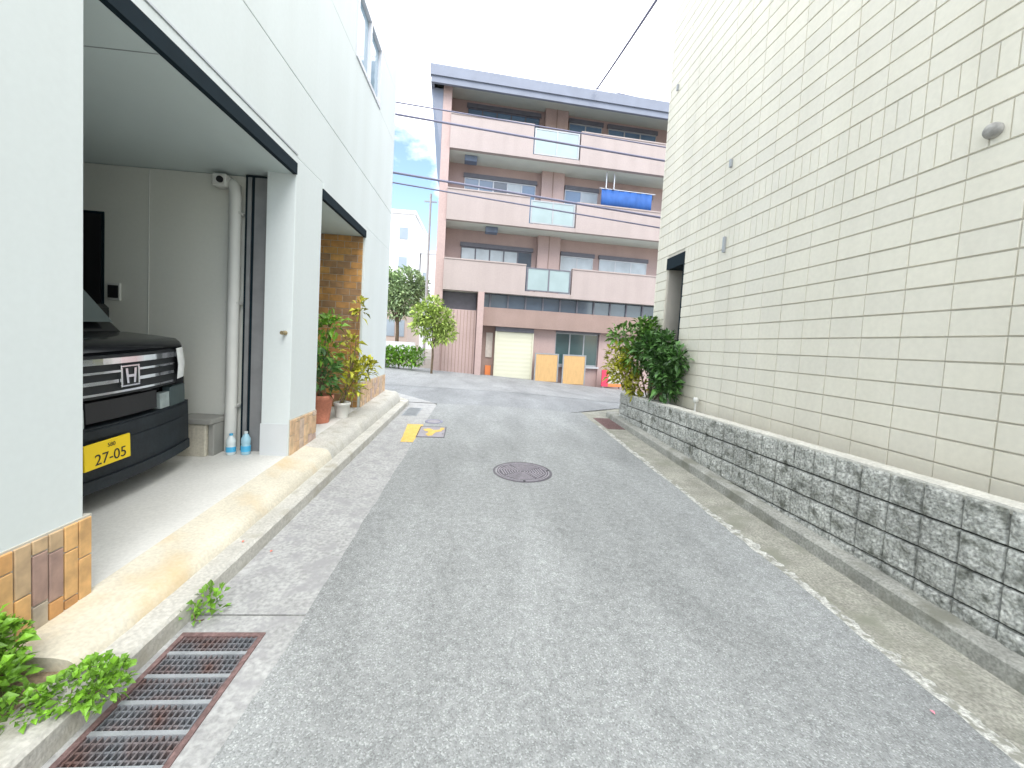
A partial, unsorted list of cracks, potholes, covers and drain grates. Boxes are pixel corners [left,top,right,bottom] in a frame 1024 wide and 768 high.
manhole cover [416,426,446,438]
drain grate [49,632,266,768]
manhole cover [493,462,552,483]
drain grate [402,407,422,416]
drain grate [594,418,625,430]
